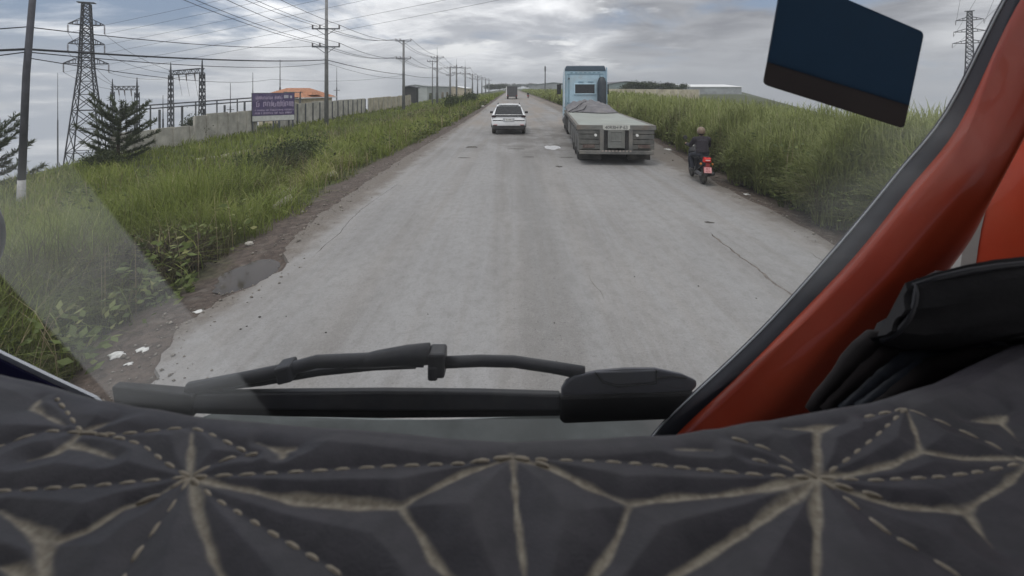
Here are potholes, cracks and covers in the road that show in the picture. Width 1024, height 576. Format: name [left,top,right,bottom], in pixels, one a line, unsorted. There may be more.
crack [712,234,792,295]
